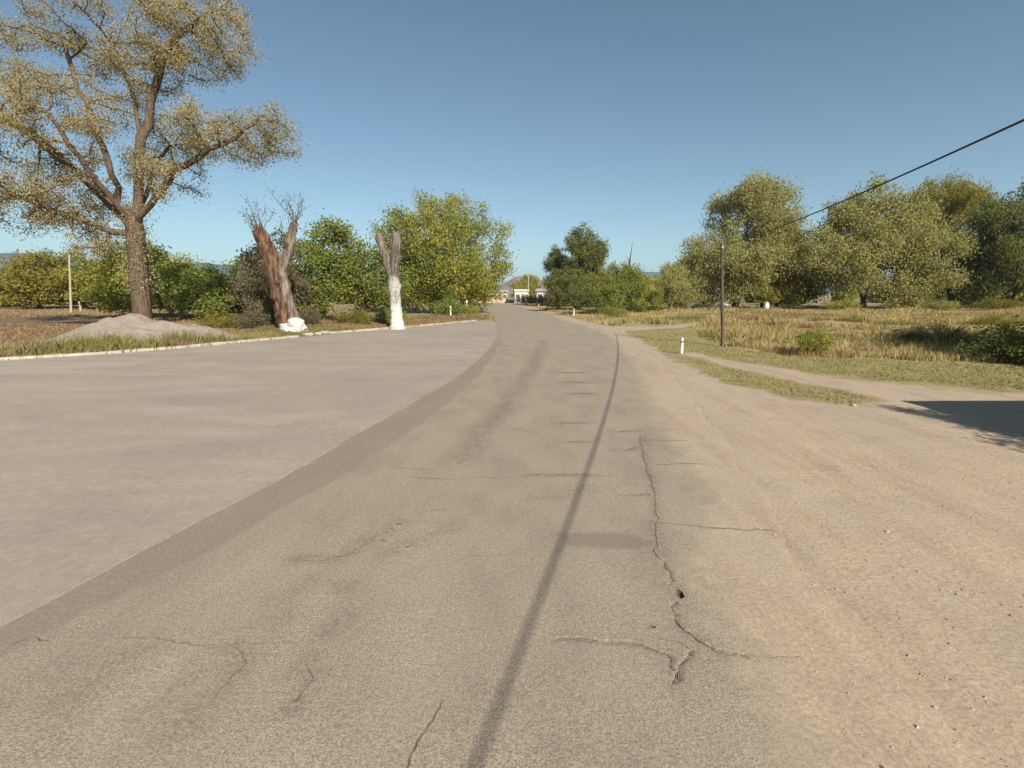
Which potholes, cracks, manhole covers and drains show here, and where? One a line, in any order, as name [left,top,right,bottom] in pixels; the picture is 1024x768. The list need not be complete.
pothole [667,583,692,604]
crack [552,515,799,684]
crack [118,637,320,707]
crack [406,700,444,768]
crack [297,536,417,561]
crack [619,430,706,499]
crack [398,467,598,480]
